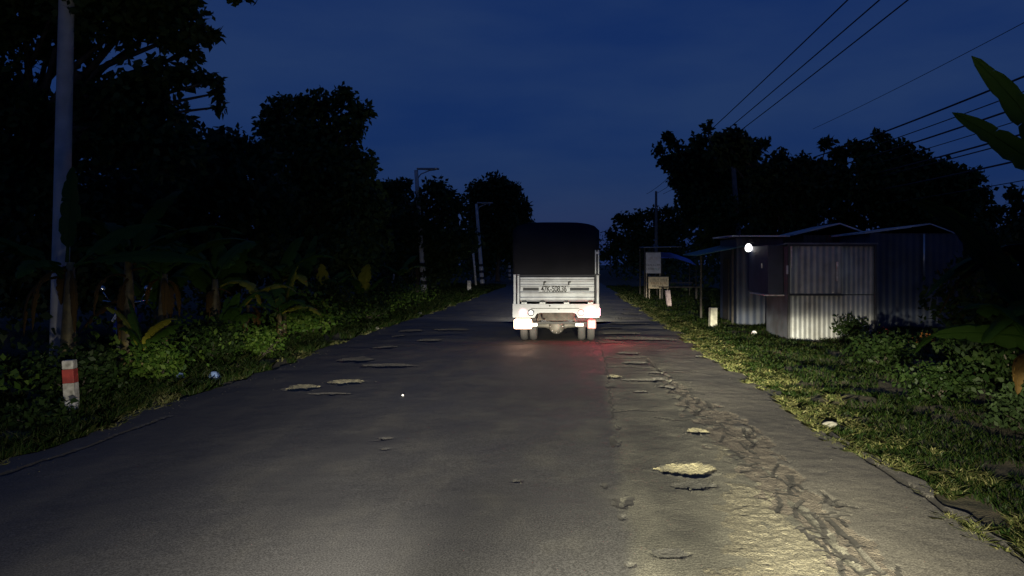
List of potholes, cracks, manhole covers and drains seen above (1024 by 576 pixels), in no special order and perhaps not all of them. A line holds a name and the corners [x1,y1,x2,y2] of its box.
pothole [653,462,717,479]
crack [612,358,1024,576]
pothole [611,497,635,509]
pothole [687,427,710,435]
pothole [669,480,719,491]
